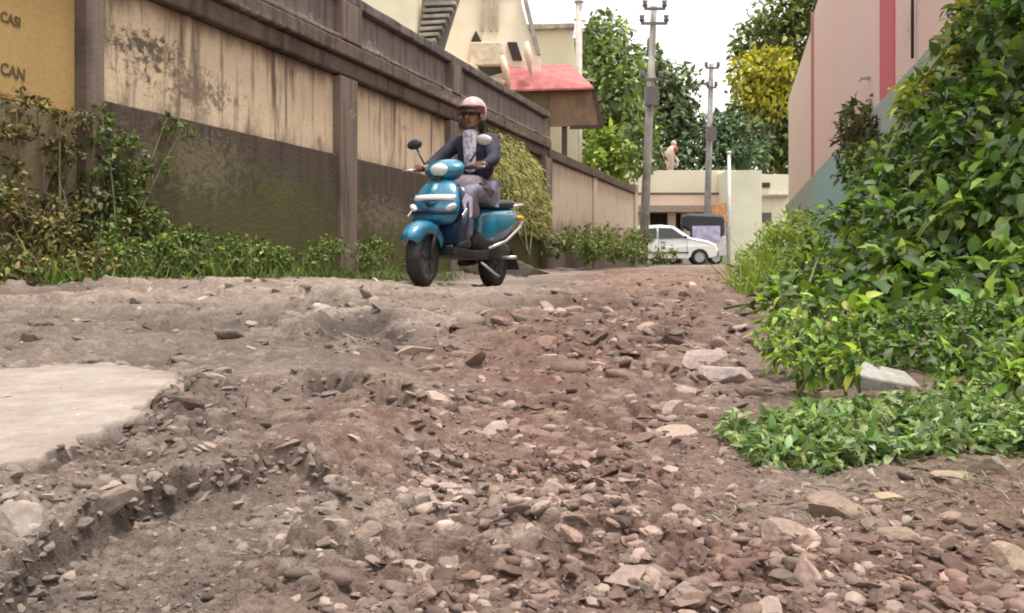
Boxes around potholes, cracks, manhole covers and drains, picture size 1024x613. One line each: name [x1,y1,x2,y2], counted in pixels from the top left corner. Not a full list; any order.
pothole [279,365,386,398]
pothole [285,308,421,346]
pothole [354,378,424,414]
